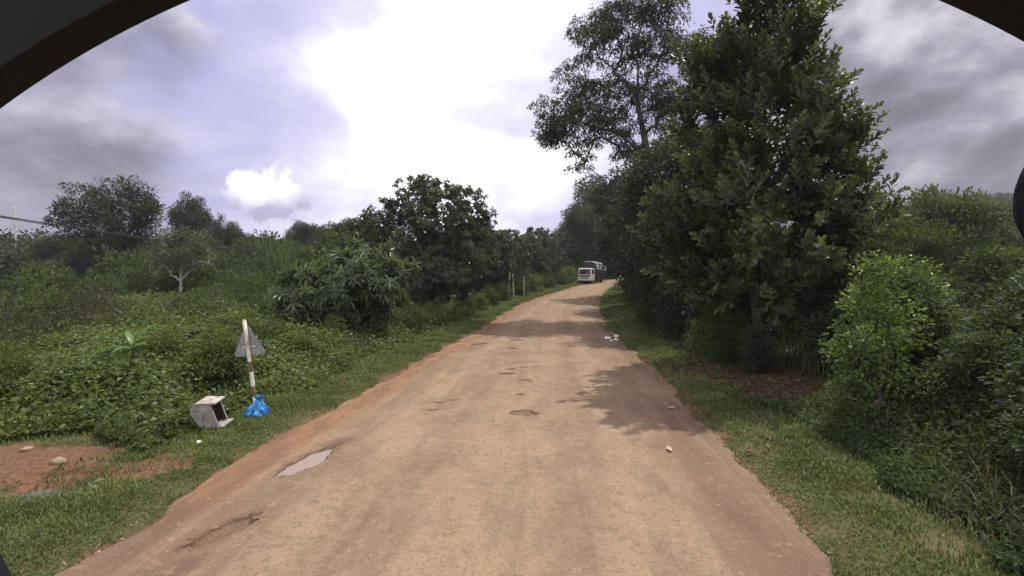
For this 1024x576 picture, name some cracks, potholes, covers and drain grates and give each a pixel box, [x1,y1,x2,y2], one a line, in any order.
pothole [167,511,266,556]
pothole [505,408,544,417]
pothole [266,443,341,480]
